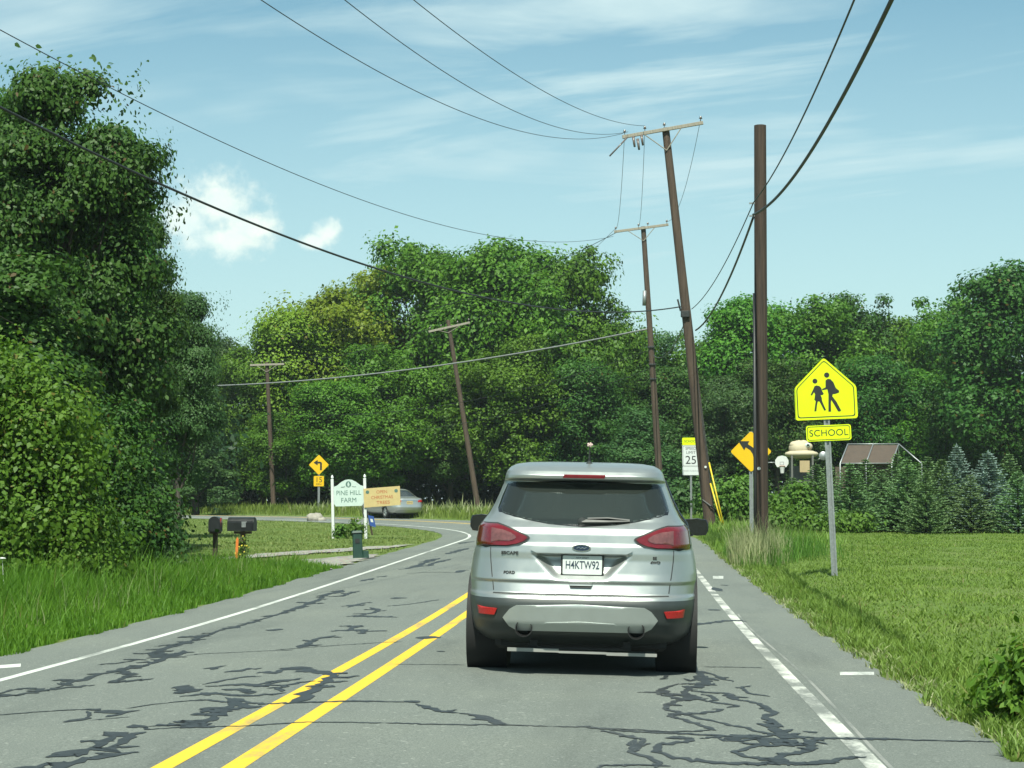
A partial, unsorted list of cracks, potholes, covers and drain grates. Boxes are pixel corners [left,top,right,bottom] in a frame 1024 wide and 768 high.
crack [0,699,201,722]
